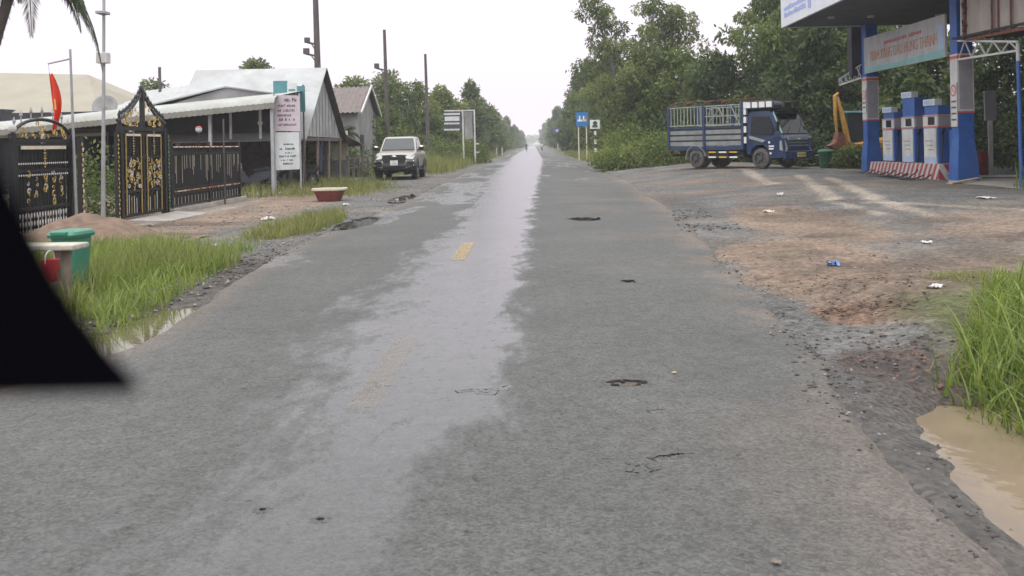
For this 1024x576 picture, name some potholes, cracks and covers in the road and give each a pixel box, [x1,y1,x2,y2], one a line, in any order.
crack [618,451,694,473]
pothole [598,378,653,389]
pothole [325,216,383,233]
pothole [252,506,273,515]
crack [455,384,514,395]
pothole [308,516,333,525]
pothole [387,194,419,203]
